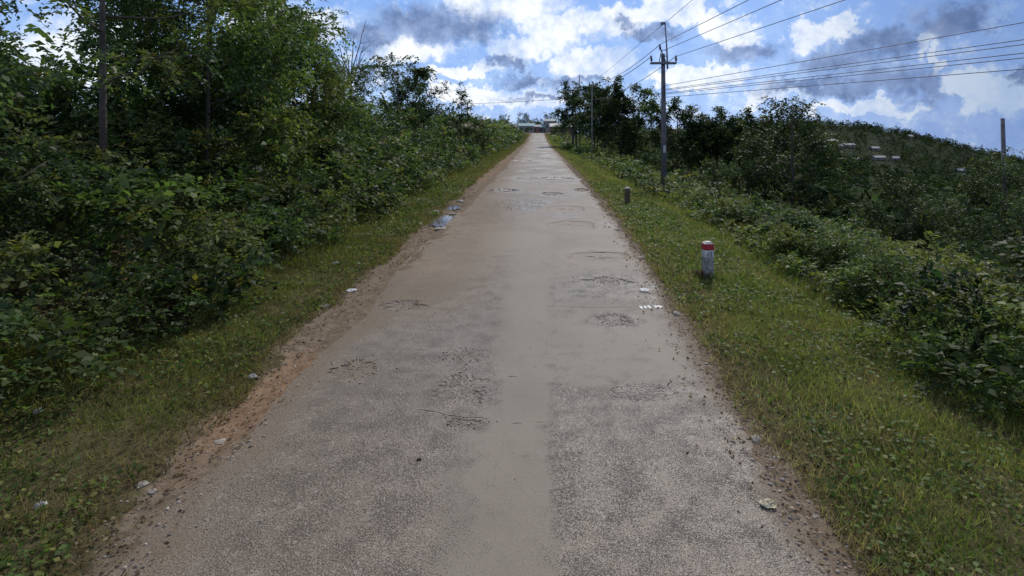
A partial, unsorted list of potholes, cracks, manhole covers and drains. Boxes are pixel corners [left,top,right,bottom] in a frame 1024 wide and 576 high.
pothole [324,357,379,382]
pothole [444,418,484,429]
pothole [581,276,636,287]
pothole [594,313,633,326]
pothole [569,252,630,262]
pothole [547,220,595,230]
pothole [431,372,490,410]
pothole [379,299,430,313]
